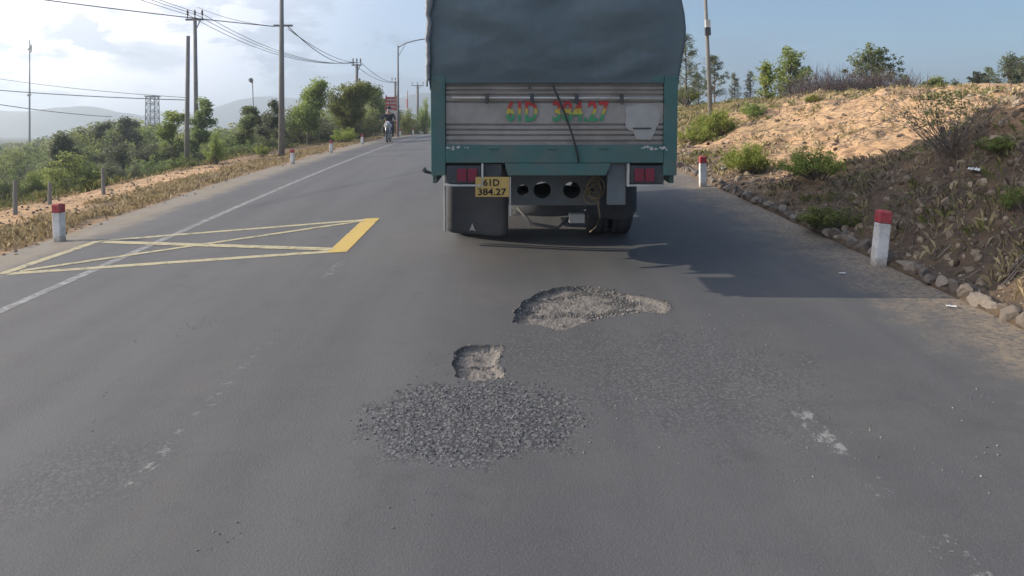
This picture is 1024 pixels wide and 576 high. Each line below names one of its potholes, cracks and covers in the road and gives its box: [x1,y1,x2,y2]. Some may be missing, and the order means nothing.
pothole [512,285,673,331]
pothole [451,344,509,382]
